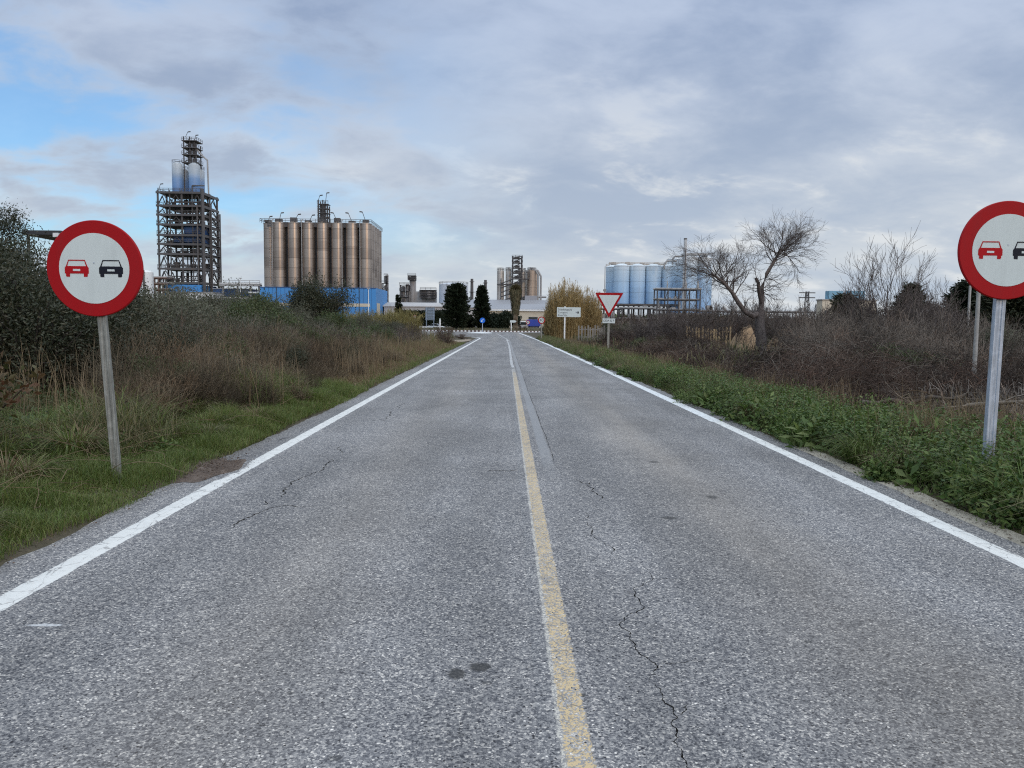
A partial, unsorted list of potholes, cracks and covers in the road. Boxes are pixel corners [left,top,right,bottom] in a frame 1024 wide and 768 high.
crack [618,576,706,768]
crack [233,447,343,528]
